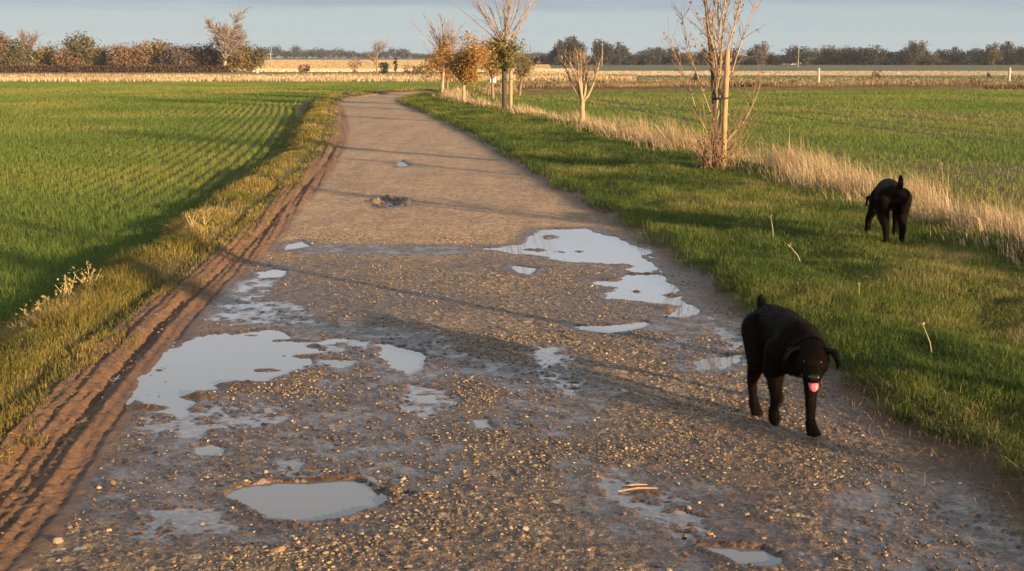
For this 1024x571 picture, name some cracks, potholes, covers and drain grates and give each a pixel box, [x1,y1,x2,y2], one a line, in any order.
pothole [672,533,811,571]
pothole [357,338,442,379]
pothole [98,322,368,423]
pothole [669,348,748,374]
pothole [559,316,666,336]
pothole [467,226,726,322]
pothole [273,239,323,252]
pothole [390,160,416,168]
pothole [245,265,300,281]
pothole [369,194,413,208]
pothole [200,471,414,530]
